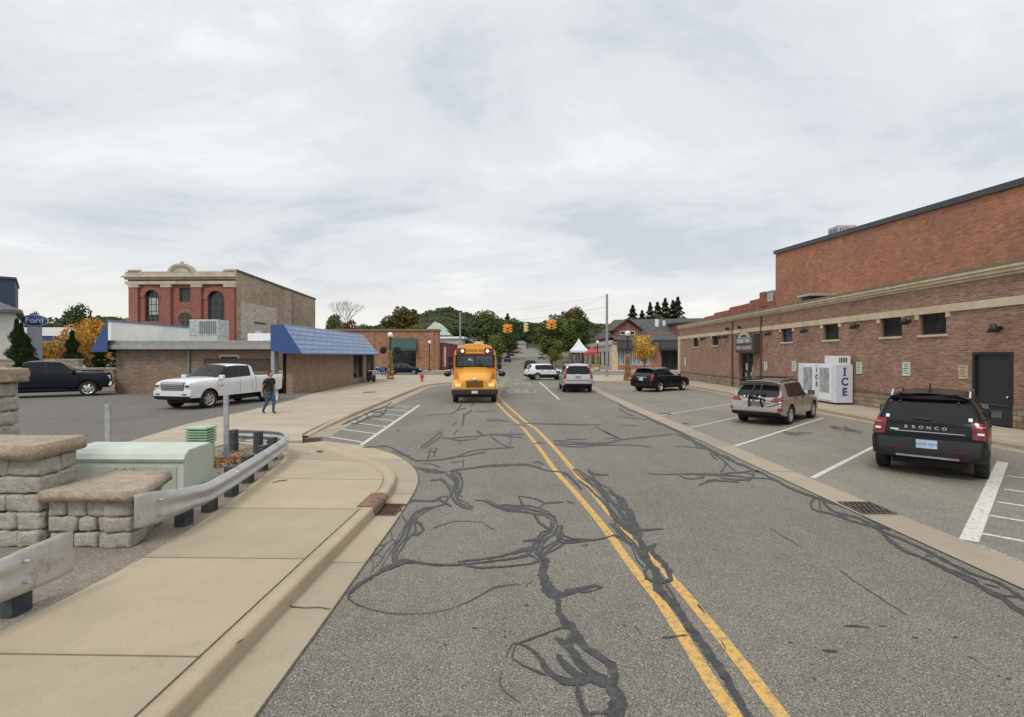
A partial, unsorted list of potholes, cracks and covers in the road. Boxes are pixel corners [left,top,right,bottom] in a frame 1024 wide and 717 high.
drain grate [357,492,407,516]
crack [499,672,520,716]
crack [476,410,545,444]
crack [595,416,648,439]
drain grate [837,501,898,514]
crack [518,495,572,508]
crack [409,495,496,530]
crack [356,531,402,579]
